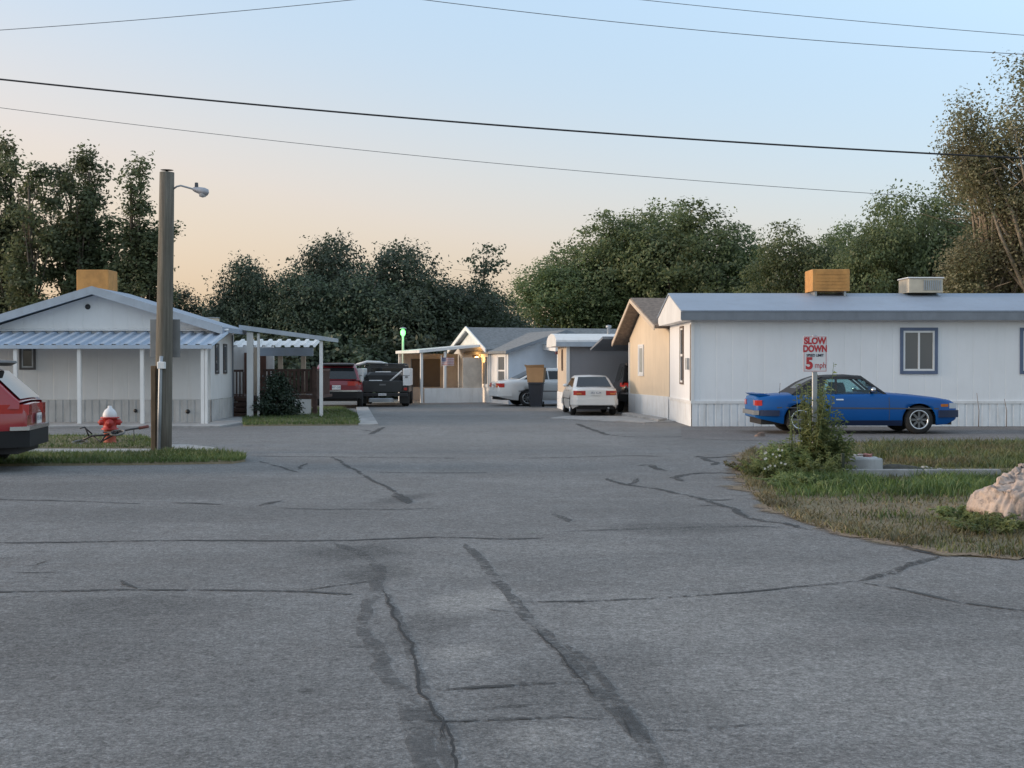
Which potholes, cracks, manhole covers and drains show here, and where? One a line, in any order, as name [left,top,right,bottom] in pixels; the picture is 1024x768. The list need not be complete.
crack [546,455,806,535]
crack [489,545,1024,618]
crack [383,591,631,768]
crack [259,457,437,510]
